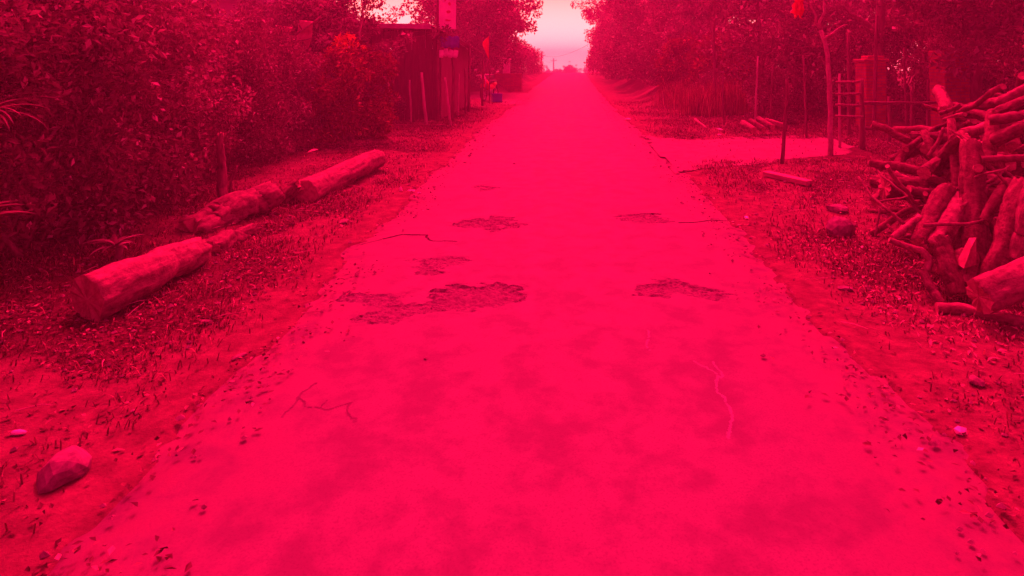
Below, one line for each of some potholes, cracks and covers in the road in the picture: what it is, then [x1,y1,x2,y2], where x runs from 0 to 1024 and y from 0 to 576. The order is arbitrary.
pothole [425,282,528,312]
pothole [453,215,528,233]
crack [281,383,358,423]
pothole [335,256,471,325]
pothole [613,213,676,224]
crack [693,361,734,439]
crack [361,234,457,245]
pothole [632,278,747,301]
